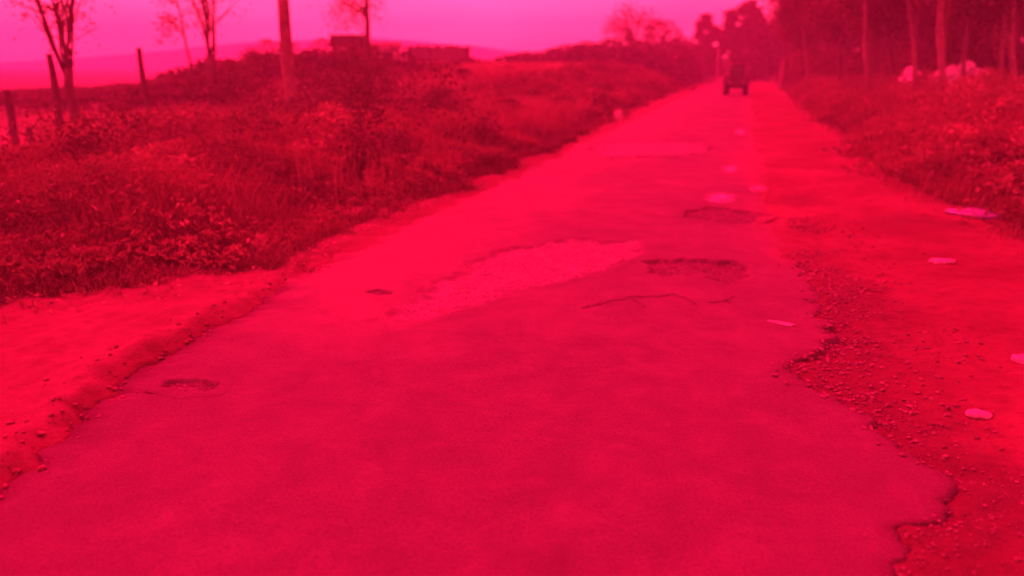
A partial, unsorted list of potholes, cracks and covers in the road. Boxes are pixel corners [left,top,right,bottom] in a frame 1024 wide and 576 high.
pothole [144,373,235,399]
pothole [635,253,760,285]
crack [581,293,734,308]
pothole [355,286,405,298]
pothole [675,205,781,225]
